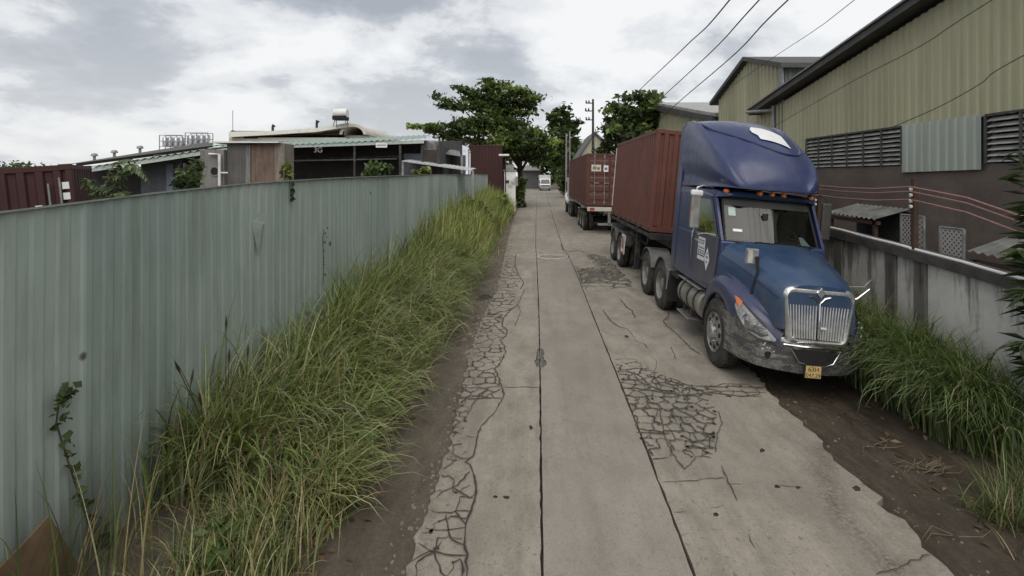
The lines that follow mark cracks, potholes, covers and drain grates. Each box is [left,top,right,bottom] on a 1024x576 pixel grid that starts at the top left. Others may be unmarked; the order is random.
crack [560,244,766,508]
crack [409,248,542,576]
pothole [535,348,546,368]
crack [877,554,931,574]
